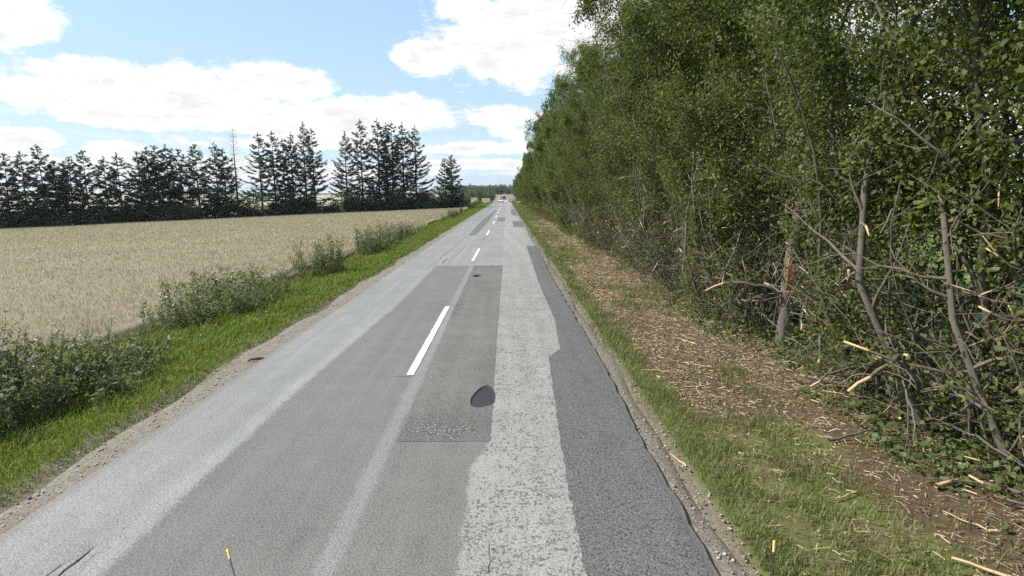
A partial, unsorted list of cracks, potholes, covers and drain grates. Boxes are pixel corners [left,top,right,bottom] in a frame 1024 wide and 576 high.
pothole [470,385,496,408]
crack [47,547,99,576]
